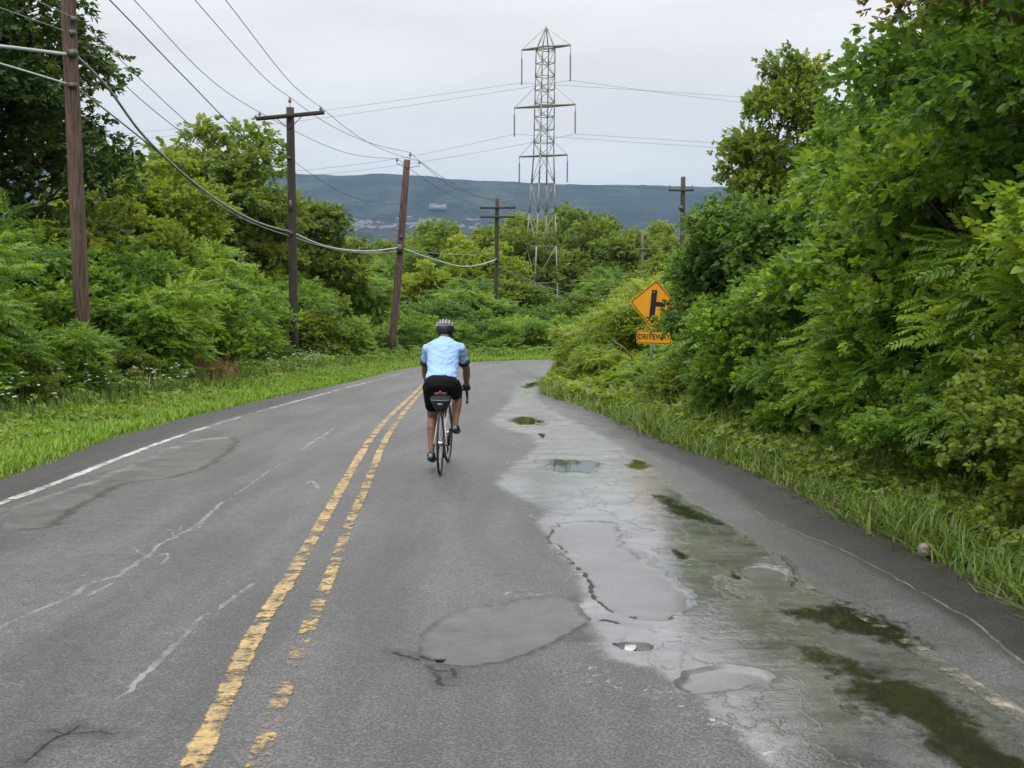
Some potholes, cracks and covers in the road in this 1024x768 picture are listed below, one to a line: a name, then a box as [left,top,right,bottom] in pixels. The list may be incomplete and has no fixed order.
pothole [673,664,776,694]
crack [25,724,111,763]
pothole [612,642,654,652]
pothole [736,563,790,583]
crack [393,652,457,687]
pothole [546,520,698,621]
